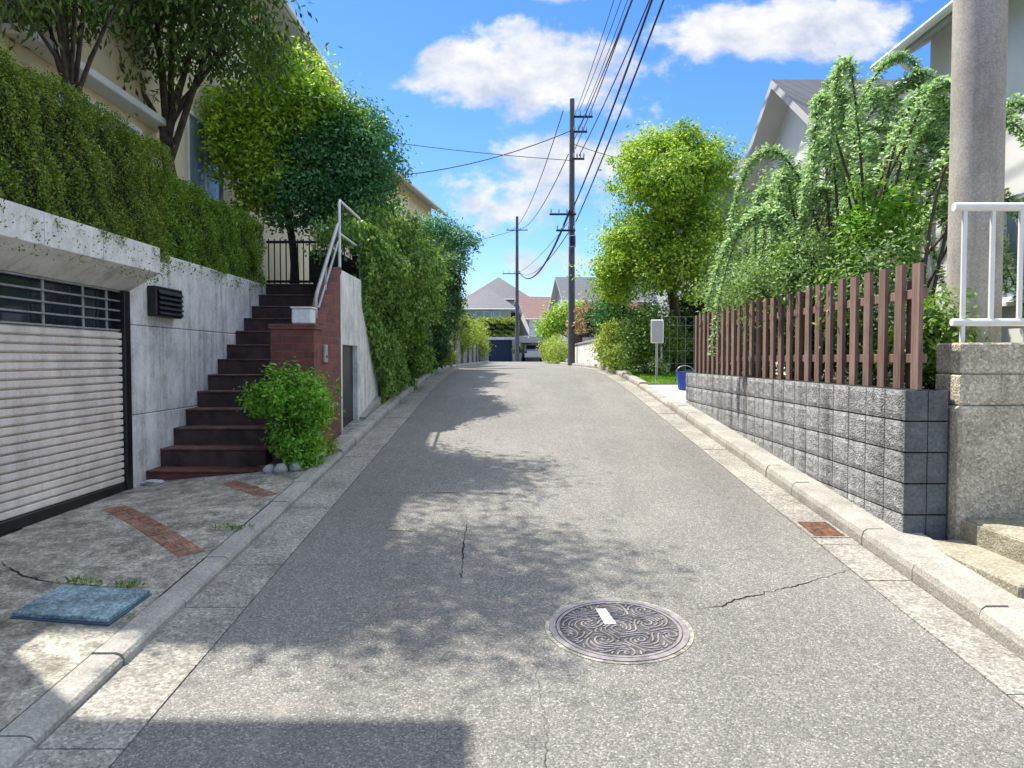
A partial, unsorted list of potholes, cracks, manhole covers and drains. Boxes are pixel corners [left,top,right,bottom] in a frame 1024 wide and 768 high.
crack [535,669,549,768]
utility cover [10,584,152,627]
manhole cover [545,598,694,665]
drain grate [793,521,850,538]
crack [2,562,113,588]
crack [459,525,467,577]
crack [705,570,850,608]
